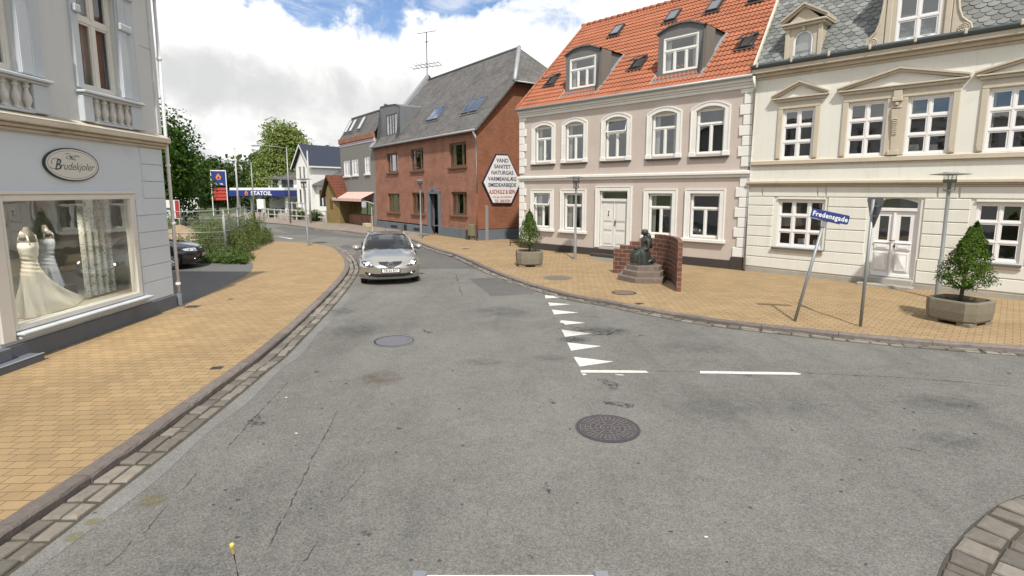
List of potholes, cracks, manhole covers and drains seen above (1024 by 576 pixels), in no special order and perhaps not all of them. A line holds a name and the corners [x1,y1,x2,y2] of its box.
manhole cover [371,335,416,347]
manhole cover [575,414,641,443]
crack [269,417,335,547]
